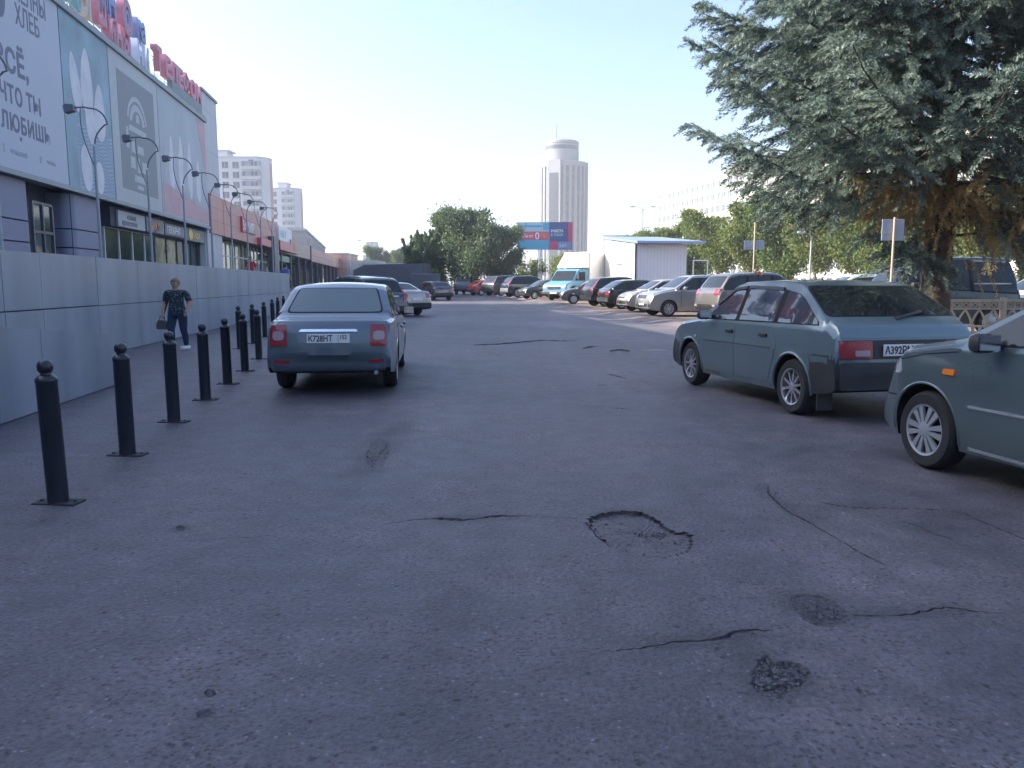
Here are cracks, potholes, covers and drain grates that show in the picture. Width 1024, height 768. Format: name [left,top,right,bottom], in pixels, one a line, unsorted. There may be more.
crack [603,629,769,651]
pothole [749,654,812,697]
crack [388,515,611,547]
crack [855,606,996,617]
pothole [789,594,849,627]
crack [767,486,1024,567]
pothole [587,510,694,558]
pothole [366,437,391,472]
